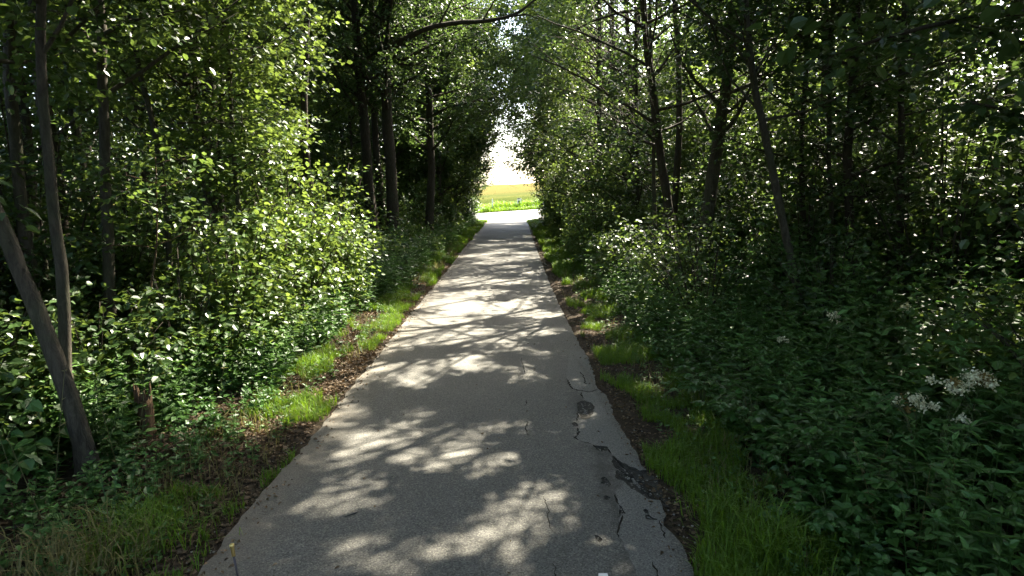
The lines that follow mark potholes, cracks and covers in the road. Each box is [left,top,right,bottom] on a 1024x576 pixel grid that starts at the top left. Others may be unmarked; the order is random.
pothole [611,456,670,508]
crack [566,373,611,453]
pothole [577,401,594,419]
